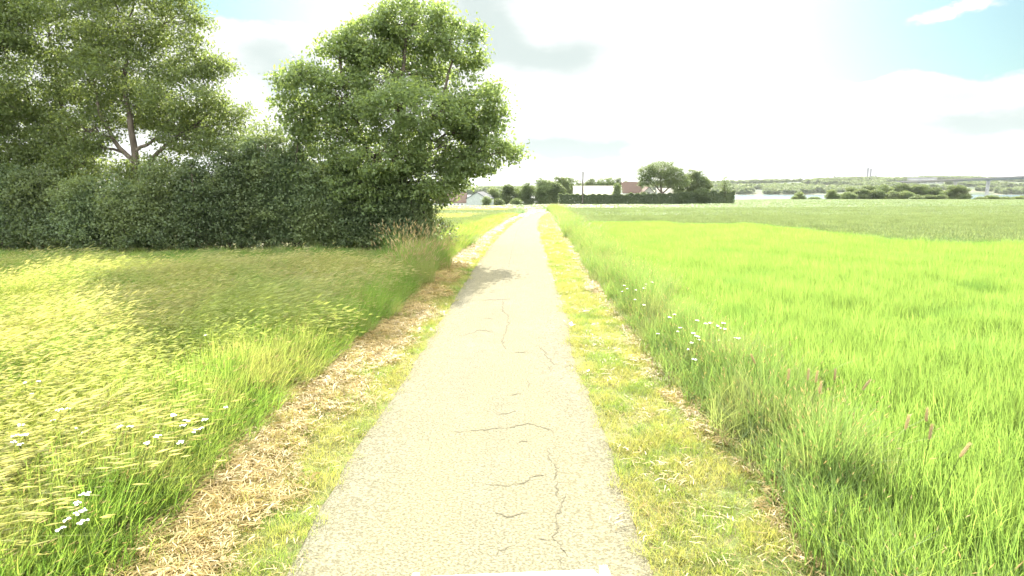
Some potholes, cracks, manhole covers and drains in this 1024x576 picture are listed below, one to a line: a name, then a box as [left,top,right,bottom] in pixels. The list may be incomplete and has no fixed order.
crack [484,451,566,565]
crack [468,216,555,368]
crack [456,382,550,443]
